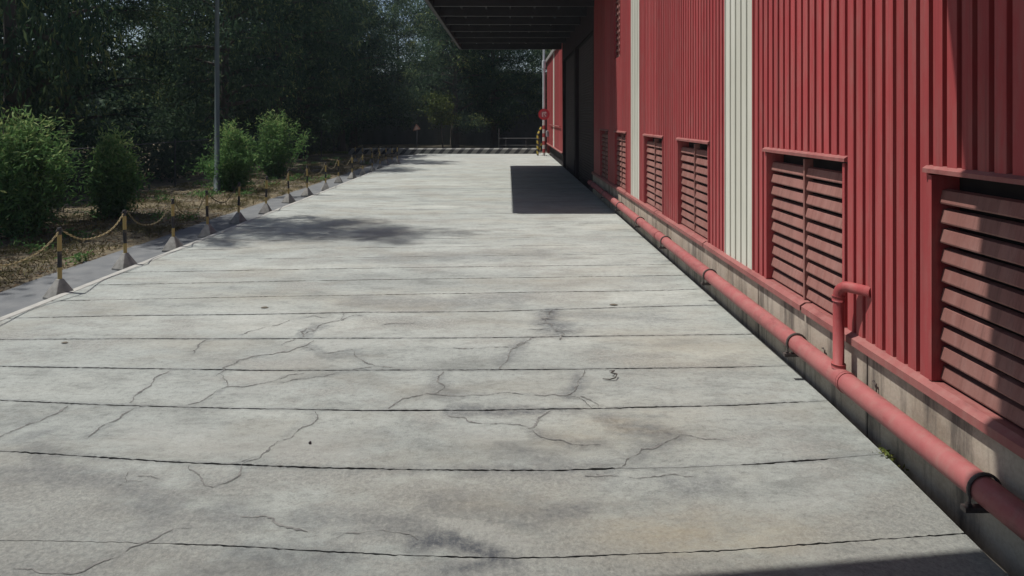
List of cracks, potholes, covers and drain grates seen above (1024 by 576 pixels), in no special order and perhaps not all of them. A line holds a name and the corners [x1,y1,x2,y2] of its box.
crack [188,412,319,487]
crack [240,515,417,539]
crack [585,434,721,478]
crack [188,312,393,405]
crack [389,370,599,445]
crack [458,310,568,368]
crack [13,529,173,574]
